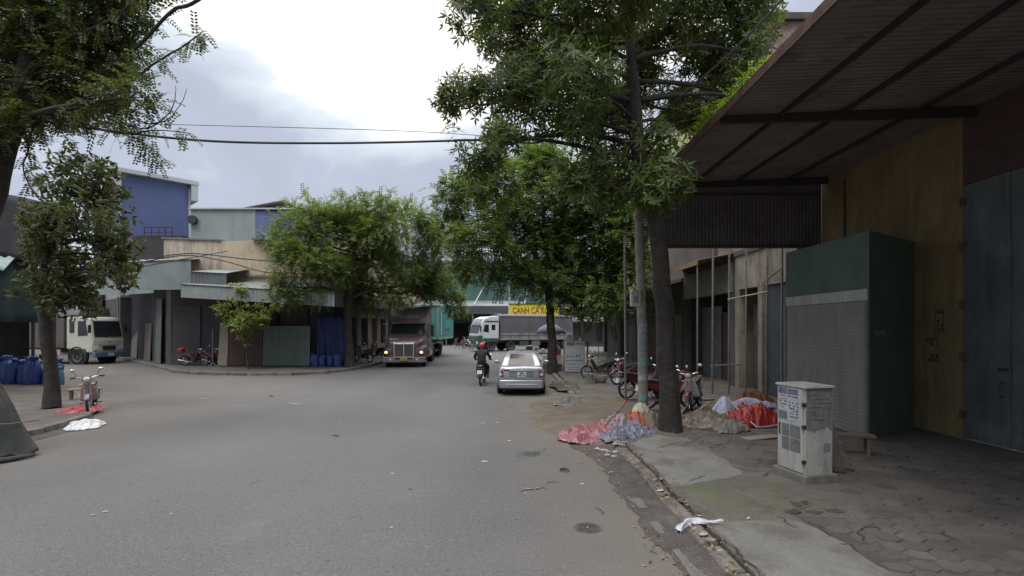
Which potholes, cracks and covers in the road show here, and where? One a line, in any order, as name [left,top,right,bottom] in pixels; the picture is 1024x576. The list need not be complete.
manhole cover [573,522,603,534]
